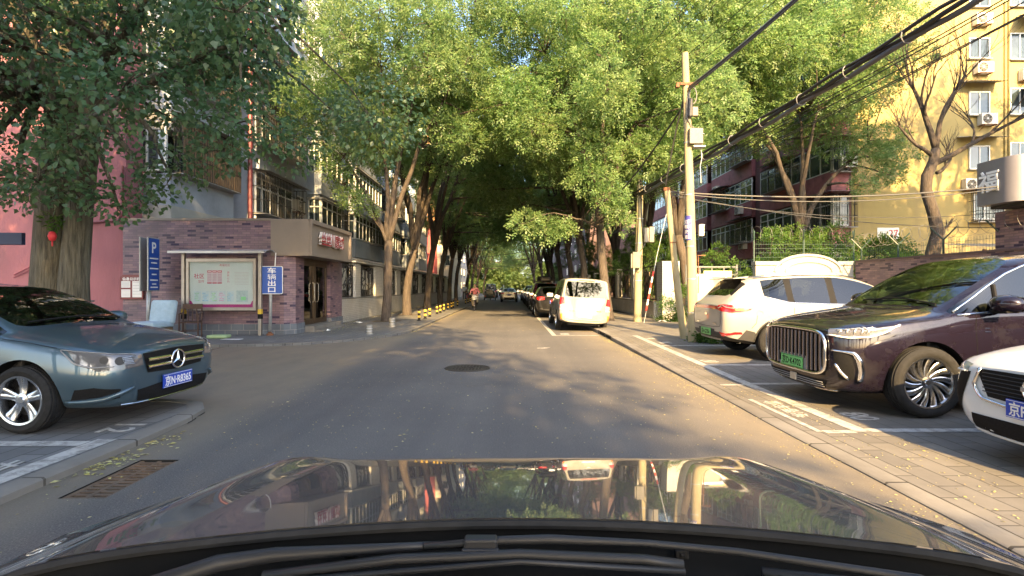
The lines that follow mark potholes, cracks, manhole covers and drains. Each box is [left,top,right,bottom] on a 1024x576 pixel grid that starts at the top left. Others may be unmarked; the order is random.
manhole cover [444,364,490,372]
drain grate [57,460,178,499]
